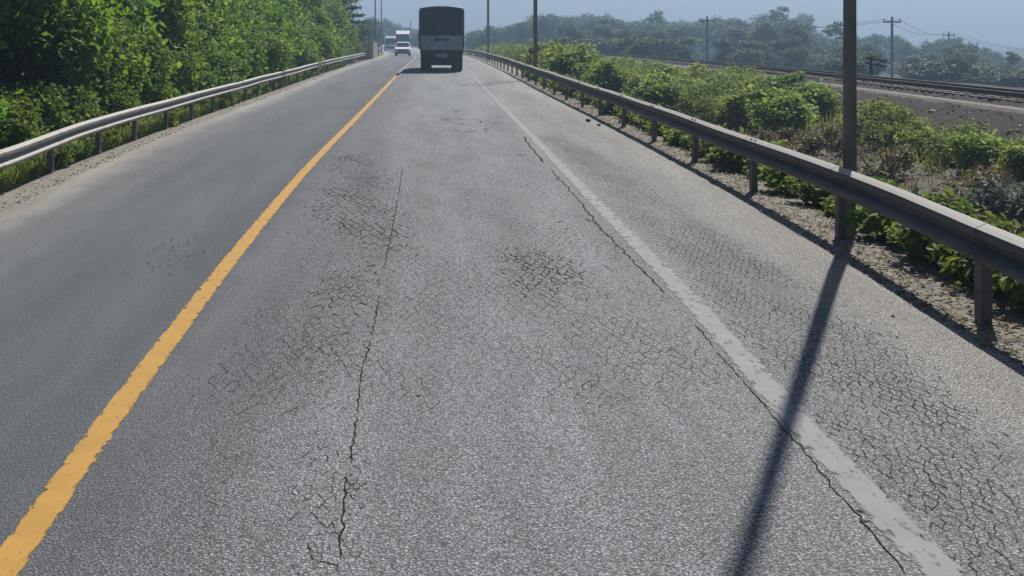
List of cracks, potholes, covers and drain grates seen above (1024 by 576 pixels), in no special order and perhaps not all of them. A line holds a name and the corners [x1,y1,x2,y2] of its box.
crack [187,119,798,417]
crack [542,137,1024,576]
